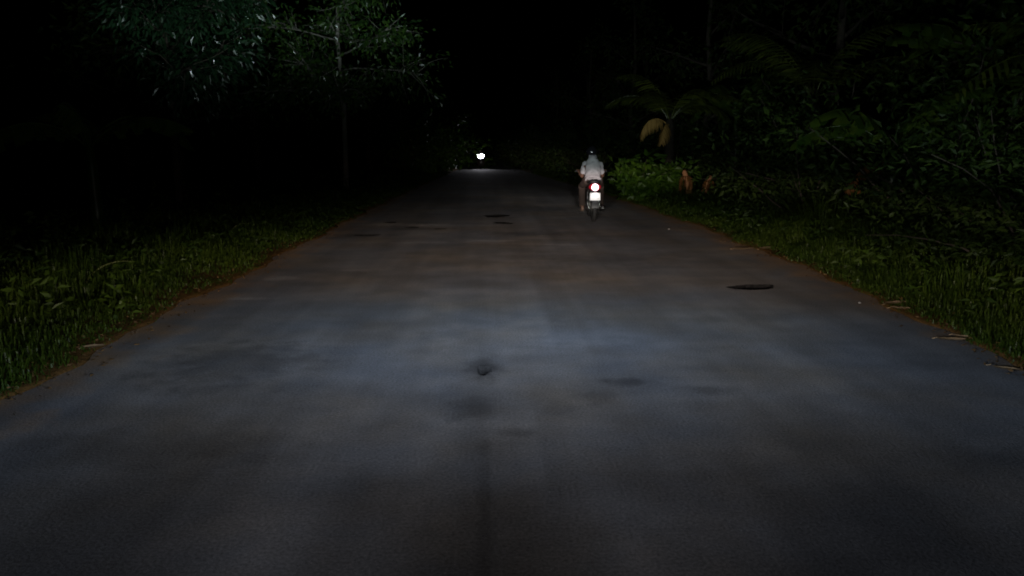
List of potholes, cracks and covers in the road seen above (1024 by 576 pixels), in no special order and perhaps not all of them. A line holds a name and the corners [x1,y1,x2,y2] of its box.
pothole [477,366,492,376]
